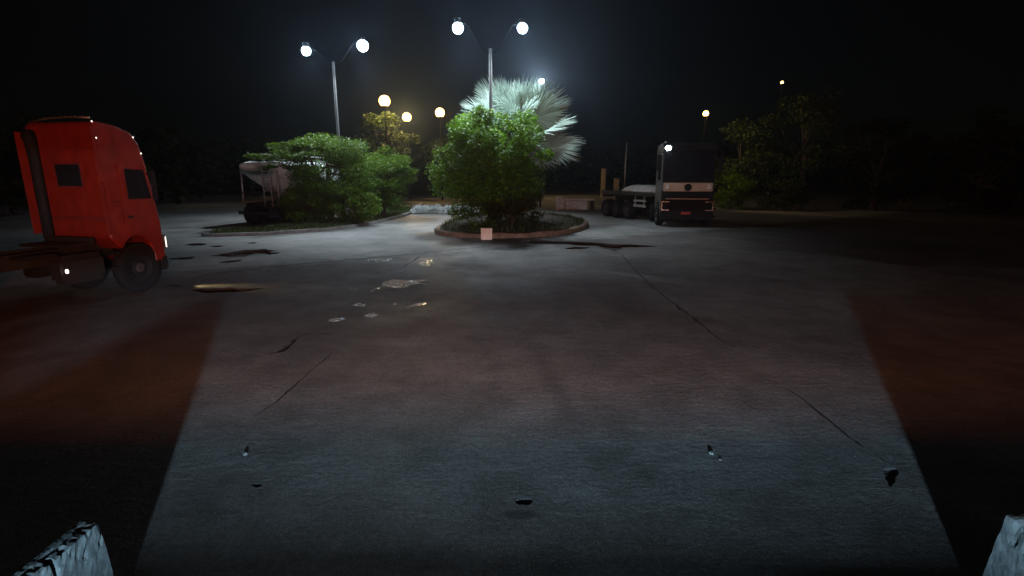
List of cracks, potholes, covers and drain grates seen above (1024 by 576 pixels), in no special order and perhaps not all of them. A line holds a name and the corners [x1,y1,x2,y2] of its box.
crack [621,254,729,346]
pothole [883,468,899,487]
crack [785,387,911,473]
crack [255,333,333,416]
